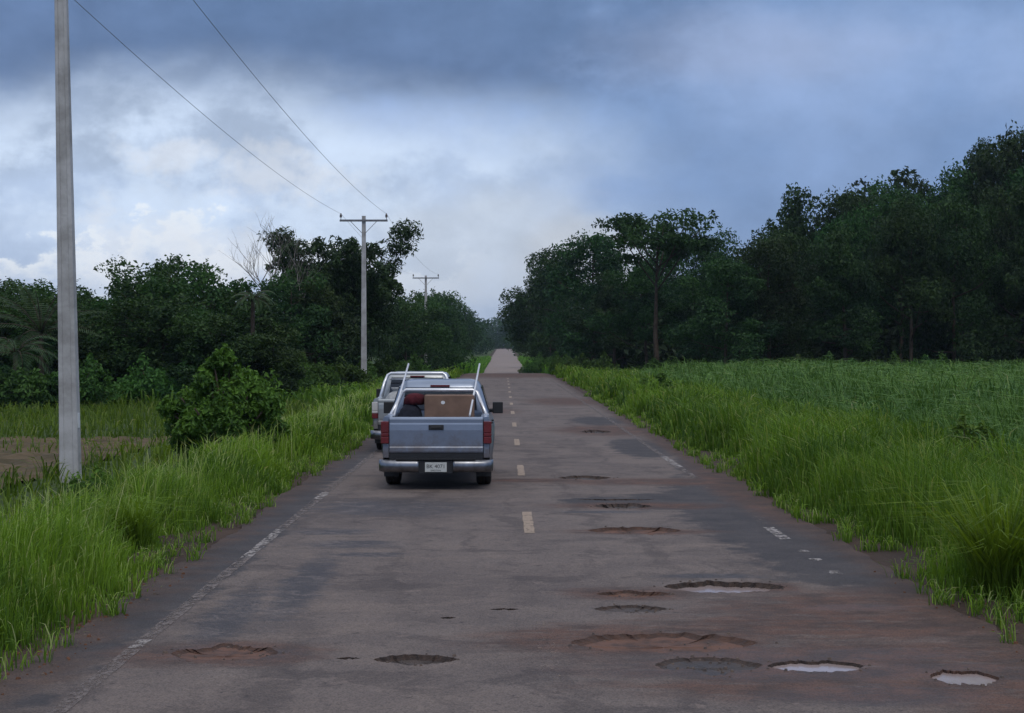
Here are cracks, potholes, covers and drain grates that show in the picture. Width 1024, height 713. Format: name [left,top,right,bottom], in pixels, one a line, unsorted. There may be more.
pothole [767,657,871,673]
pothole [373,653,460,666]
pothole [655,653,762,677]
pothole [162,643,291,663]
pothole [568,630,778,653]
pothole [925,668,1004,687]
pothole [653,579,787,593]
pothole [588,526,681,536]
pothole [594,604,674,613]
